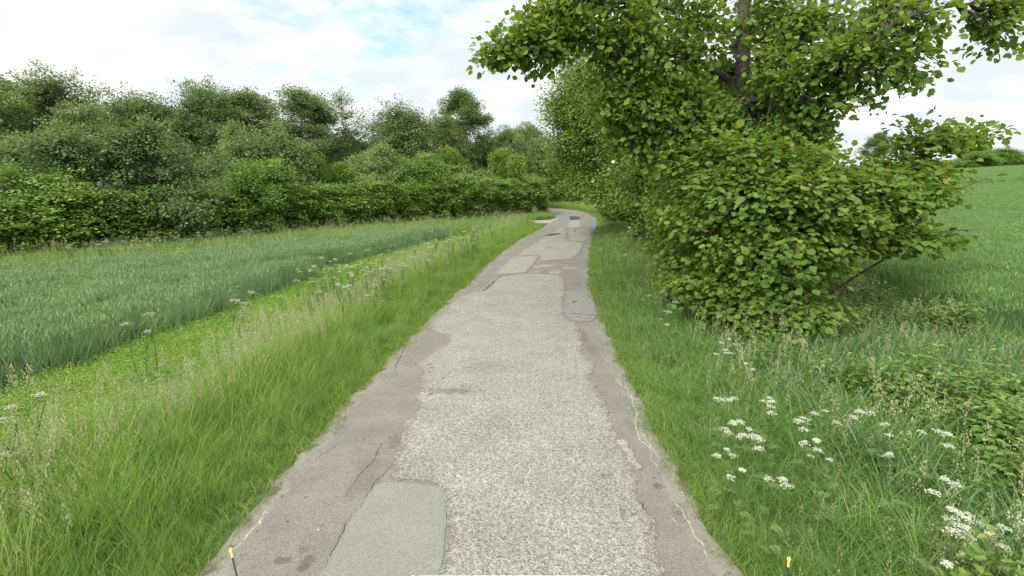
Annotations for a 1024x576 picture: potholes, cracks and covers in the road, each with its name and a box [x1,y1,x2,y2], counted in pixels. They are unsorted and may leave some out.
crack [326,433,397,565]
crack [613,372,714,573]
crack [465,247,567,295]
